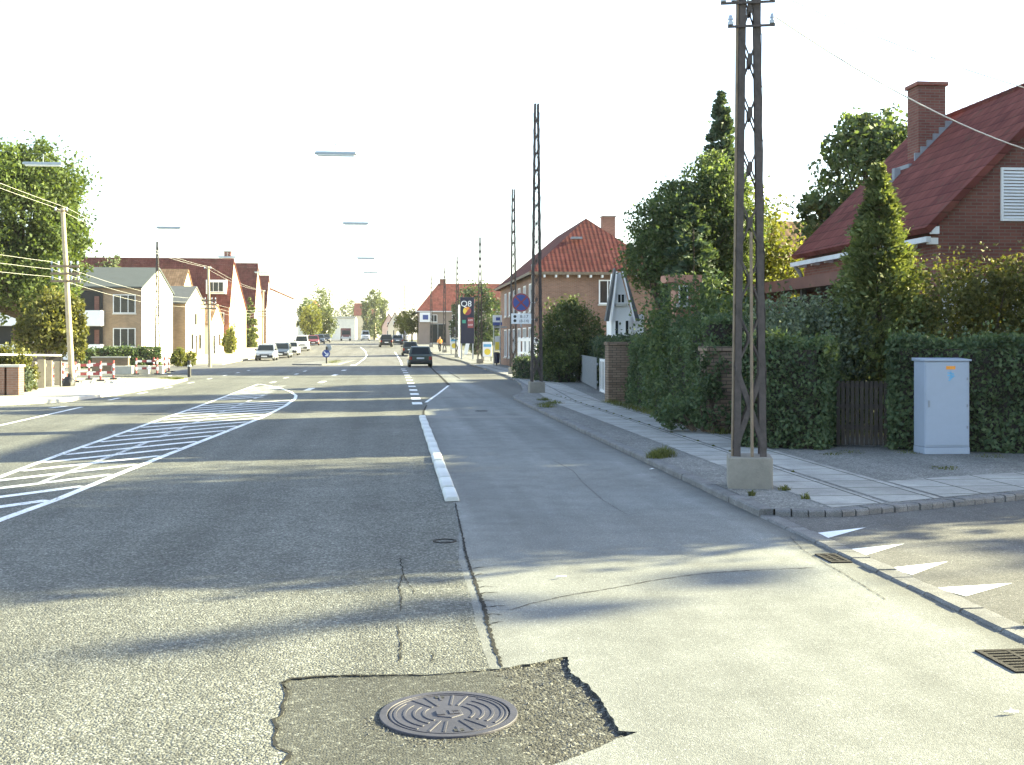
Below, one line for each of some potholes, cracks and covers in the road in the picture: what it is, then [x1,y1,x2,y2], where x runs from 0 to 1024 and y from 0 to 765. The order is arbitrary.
crack [272,556,434,764]
drain grate [975,648,1024,673]
crack [509,536,885,610]
drain grate [815,553,852,563]
manhole cover [379,691,518,739]
